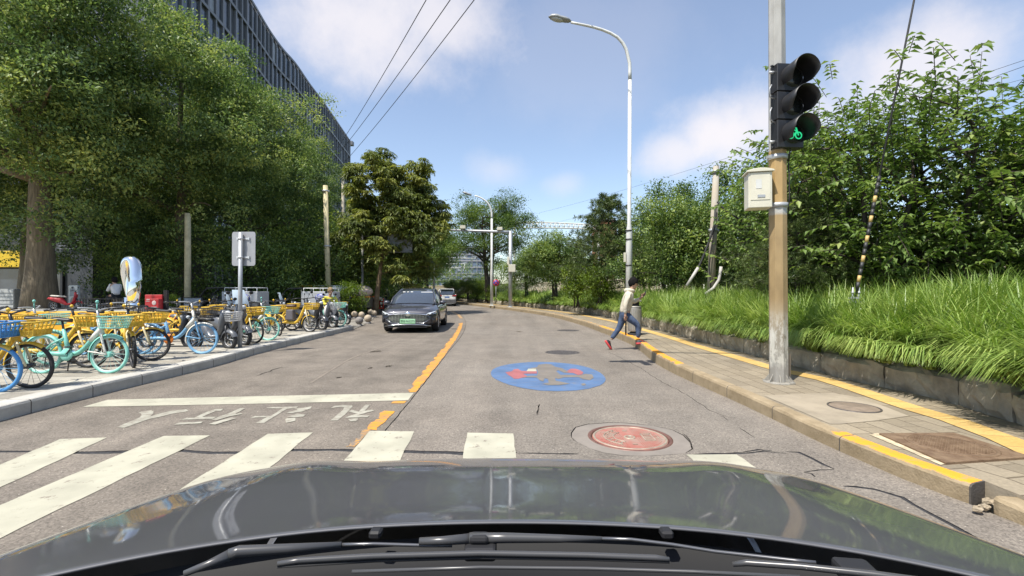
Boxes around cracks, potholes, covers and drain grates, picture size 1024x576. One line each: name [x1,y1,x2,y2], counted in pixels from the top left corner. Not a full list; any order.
manhole cover [879,433,1024,465]
crack [786,451,834,477]
manhole cover [827,401,883,413]
manhole cover [588,425,673,451]
crack [609,352,755,438]
